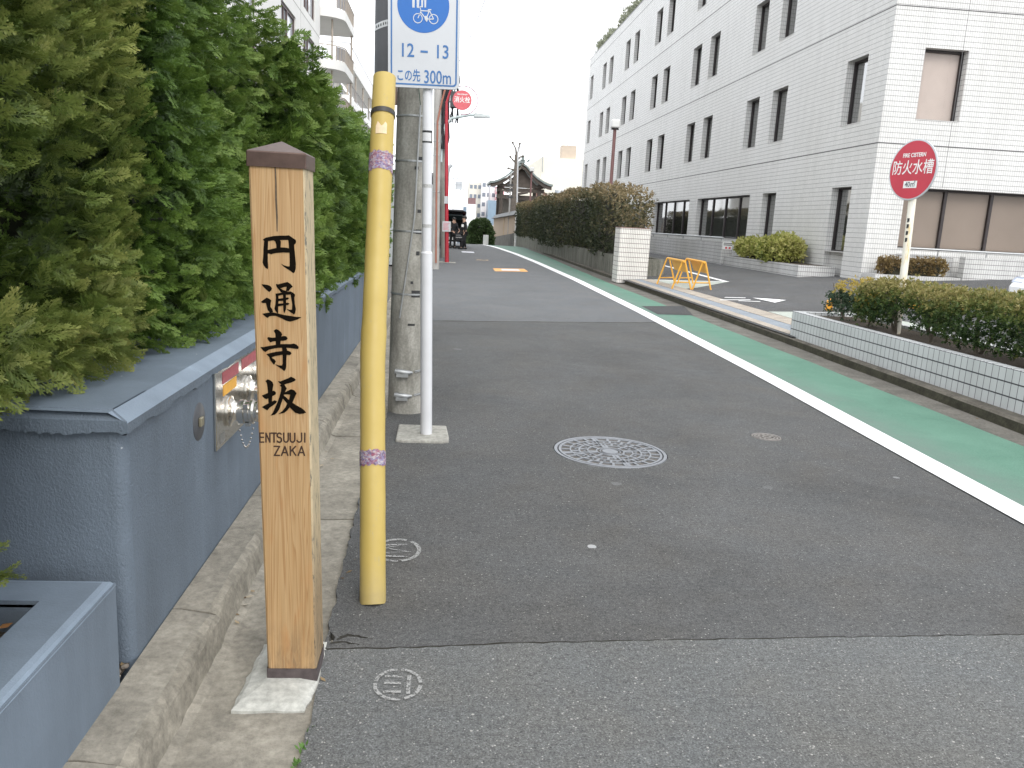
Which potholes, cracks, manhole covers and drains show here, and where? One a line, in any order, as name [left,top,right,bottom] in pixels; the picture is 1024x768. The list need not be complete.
manhole cover [554,436,667,468]
crack [325,632,1024,650]
manhole cover [751,433,782,441]
